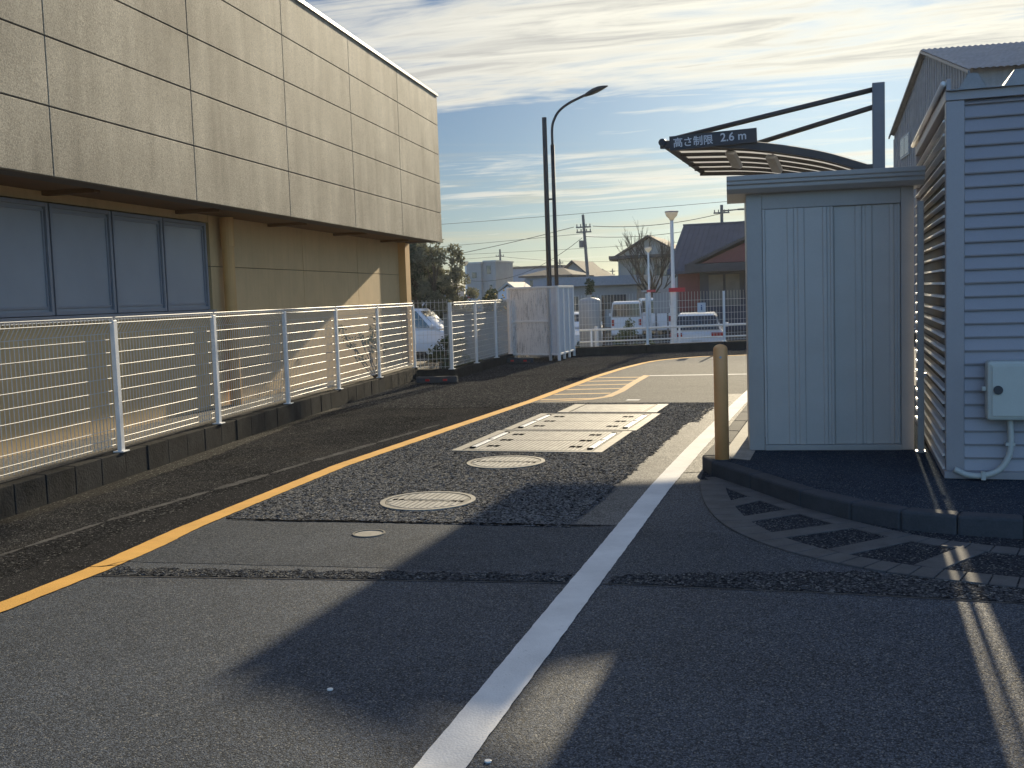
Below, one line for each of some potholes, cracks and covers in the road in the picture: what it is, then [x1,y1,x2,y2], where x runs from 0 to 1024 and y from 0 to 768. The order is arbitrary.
manhole cover [467,455,545,469]
manhole cover [380,491,476,511]
utility cover [352,529,385,537]
utility cover [559,404,669,413]
utility cover [451,430,632,453]
utility cover [503,413,660,431]
